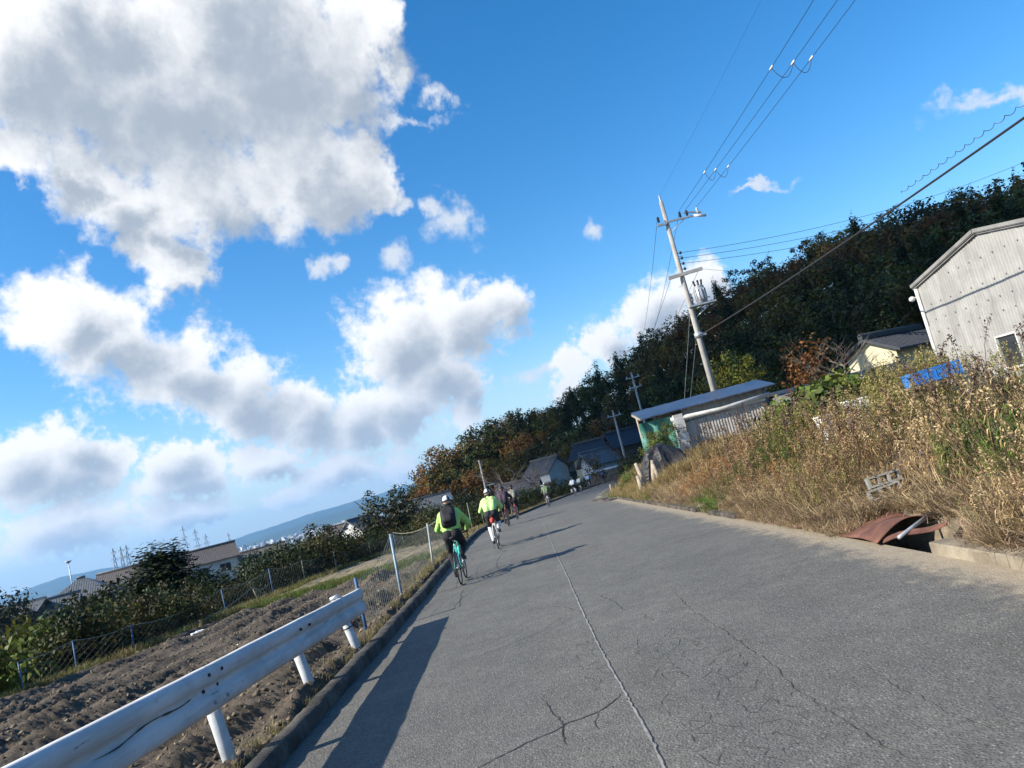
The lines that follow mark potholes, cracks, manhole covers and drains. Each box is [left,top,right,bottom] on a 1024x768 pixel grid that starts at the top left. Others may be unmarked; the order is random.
crack [478,523,916,768]
